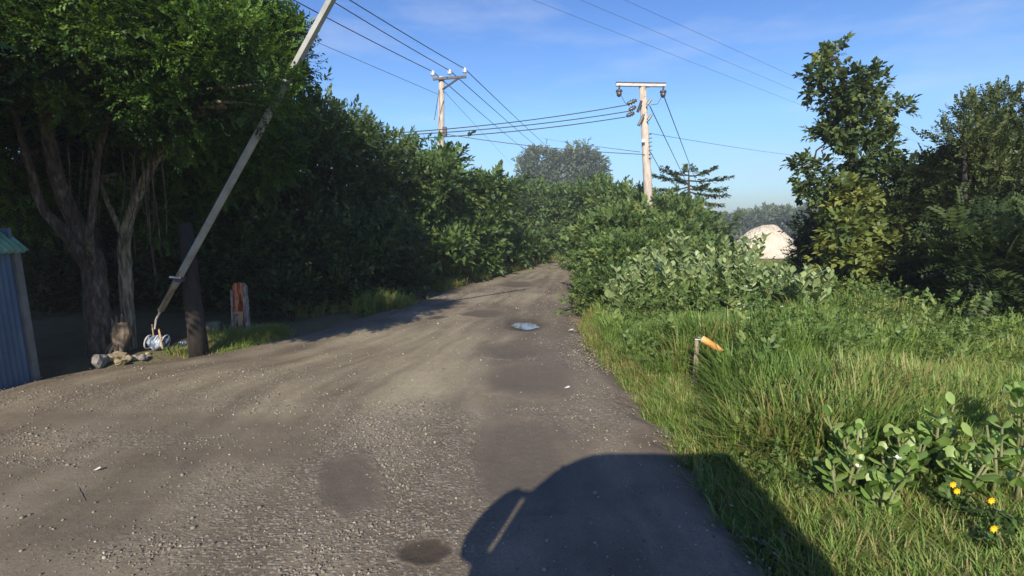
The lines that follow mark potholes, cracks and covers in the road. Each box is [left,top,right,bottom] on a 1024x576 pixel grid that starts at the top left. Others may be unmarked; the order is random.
pothole [455,309,512,319]
pothole [500,316,550,334]
pothole [392,536,459,568]
pothole [314,449,391,523]
pothole [478,343,546,361]
